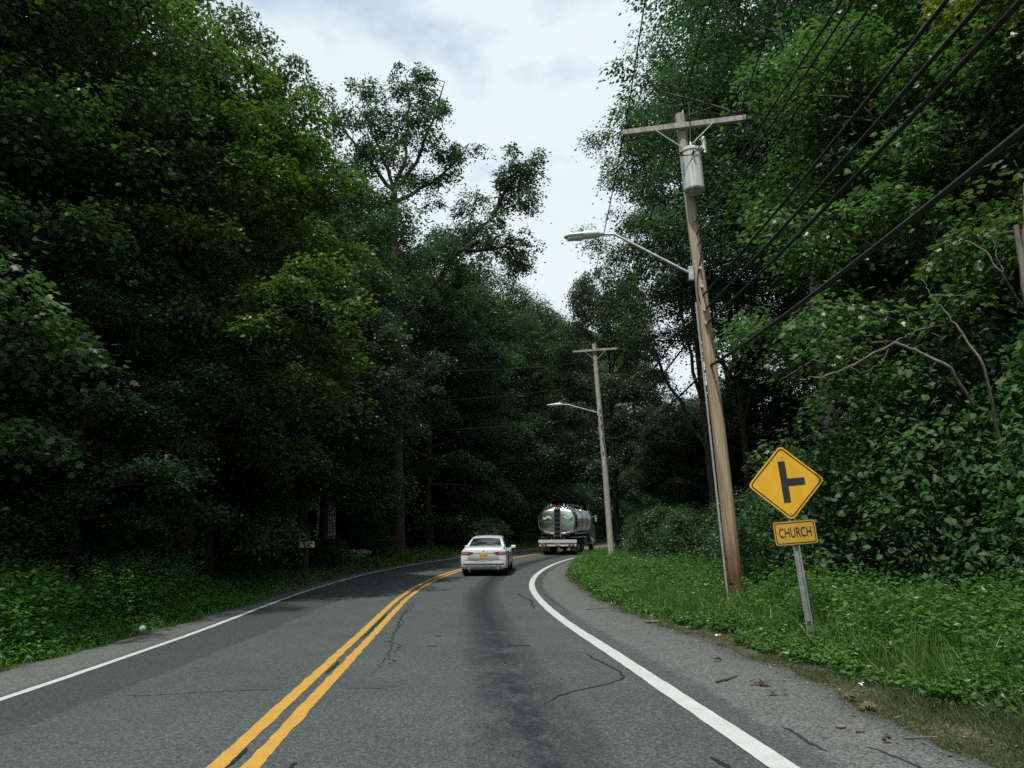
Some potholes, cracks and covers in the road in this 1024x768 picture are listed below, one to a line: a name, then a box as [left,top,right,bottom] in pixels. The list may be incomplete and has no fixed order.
crack [377,602,413,669]
crack [781,726,827,751]
crack [544,653,626,704]
crack [118,688,285,696]
crack [867,746,922,768]
